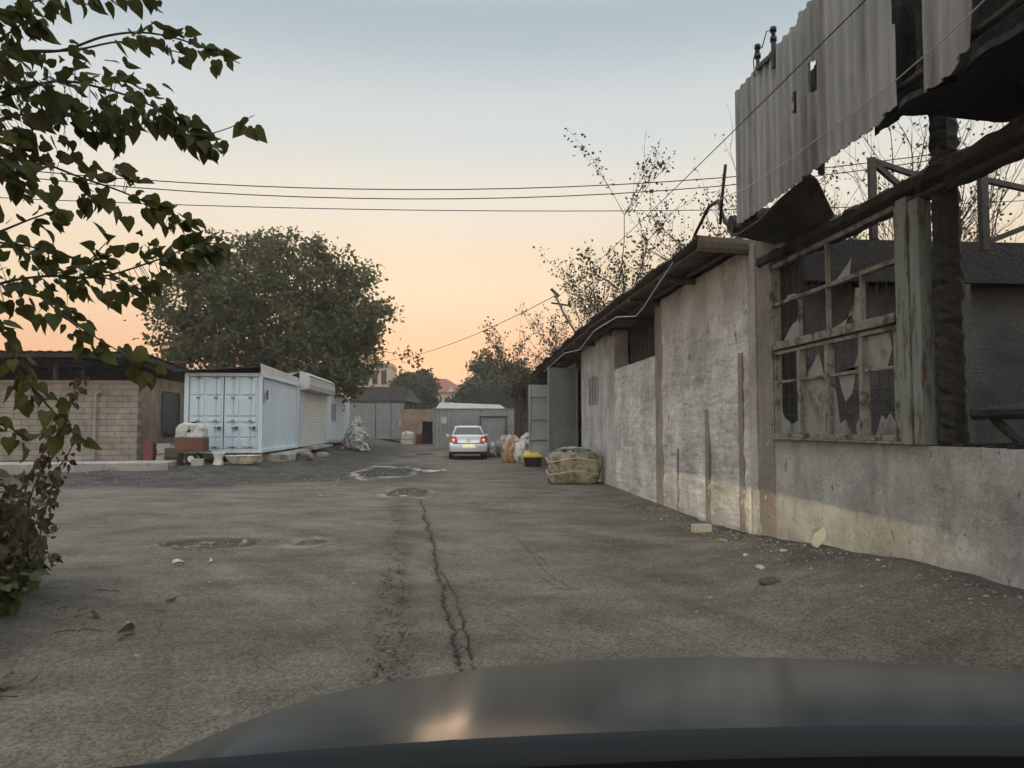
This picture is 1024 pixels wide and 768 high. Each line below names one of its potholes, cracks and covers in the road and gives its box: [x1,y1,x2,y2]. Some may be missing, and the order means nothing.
crack [338,472,582,690]
pothole [128,535,286,555]
pothole [276,536,345,550]
pothole [375,485,442,501]
pothole [347,466,422,481]
